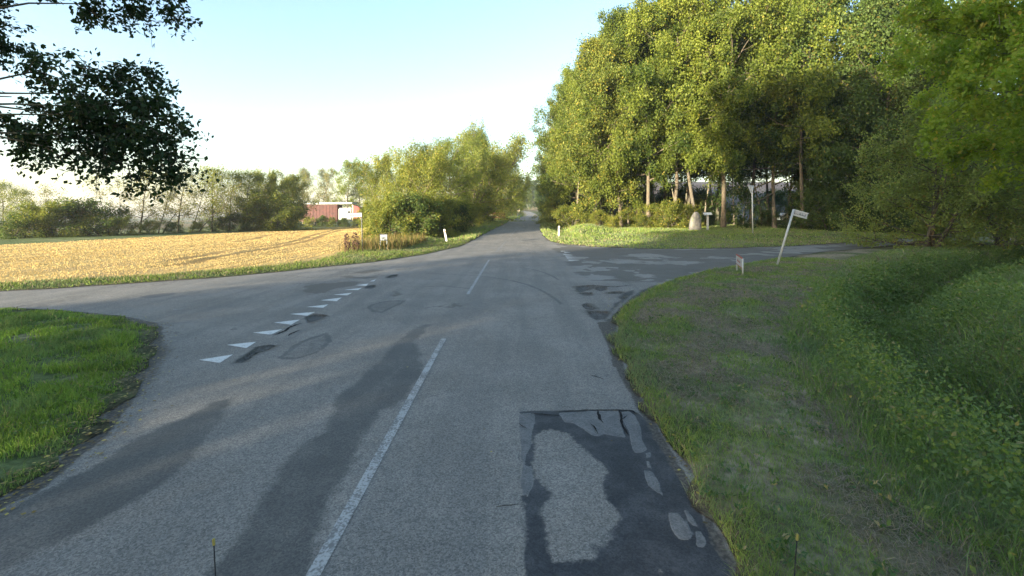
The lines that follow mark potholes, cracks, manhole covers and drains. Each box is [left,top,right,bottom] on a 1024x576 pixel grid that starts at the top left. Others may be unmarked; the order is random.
crack [519,409,635,434]
